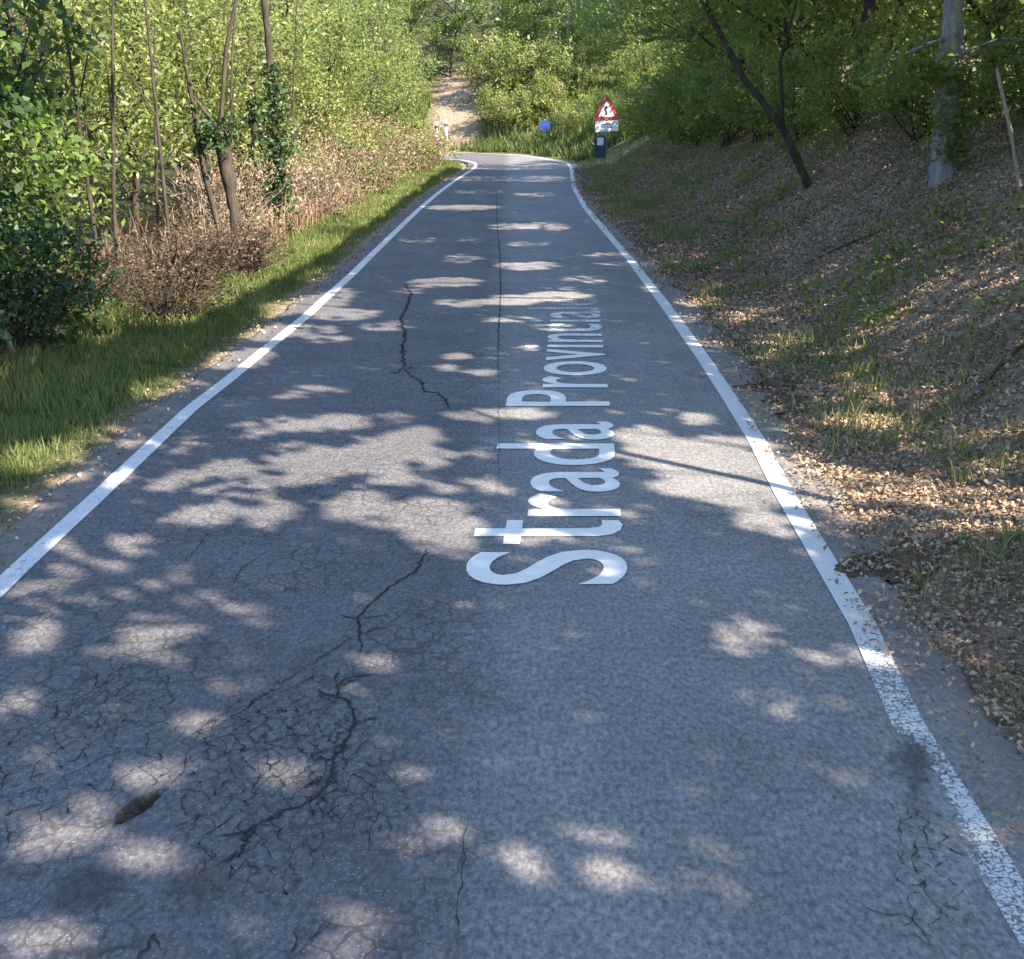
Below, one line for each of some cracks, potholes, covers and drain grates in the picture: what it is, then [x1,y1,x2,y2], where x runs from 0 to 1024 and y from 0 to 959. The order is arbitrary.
crack [0,548,428,895]
crack [291,921,332,953]
crack [863,795,964,939]
crack [137,933,162,959]
crack [390,283,451,411]
